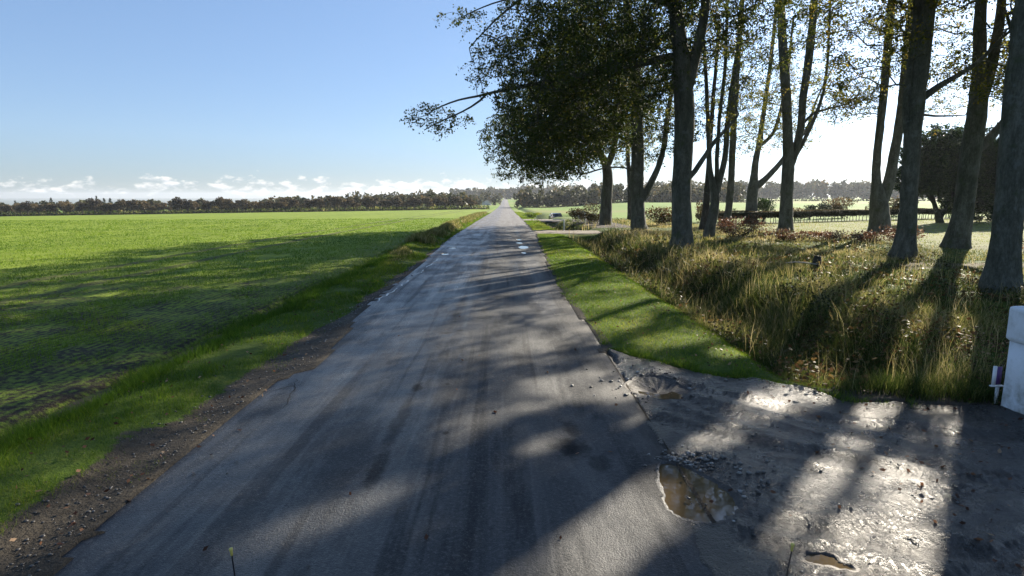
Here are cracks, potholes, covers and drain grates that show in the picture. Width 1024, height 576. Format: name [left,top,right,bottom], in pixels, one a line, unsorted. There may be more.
pothole [655,461,747,525]
pothole [797,549,860,572]
pothole [623,374,694,400]
